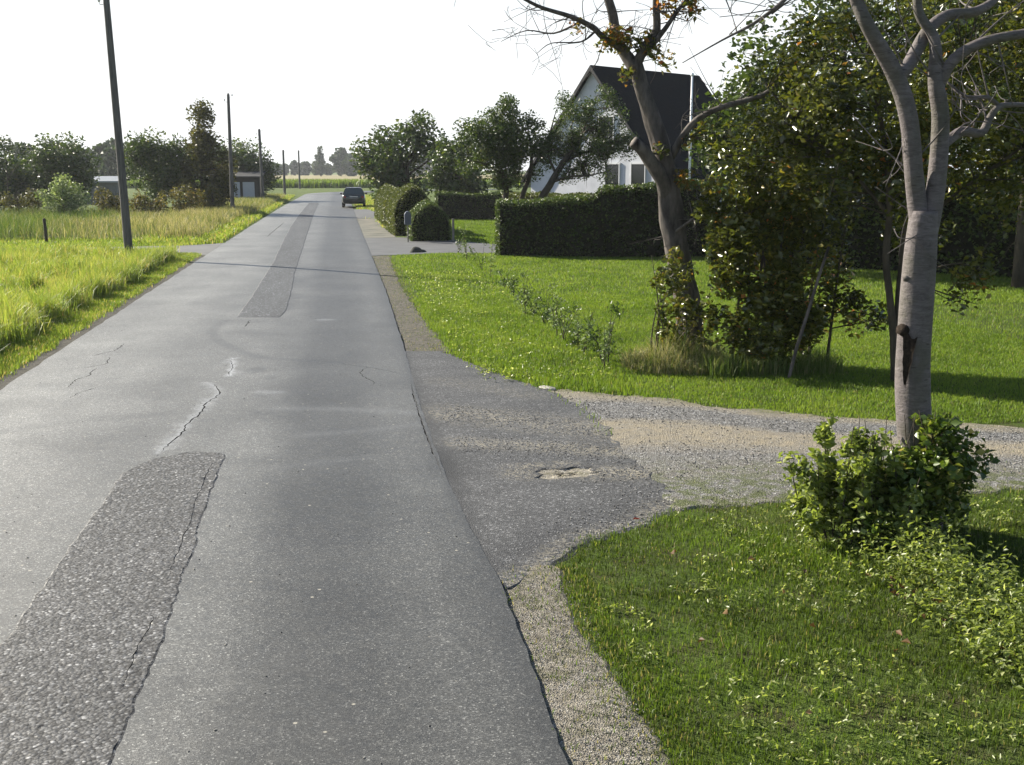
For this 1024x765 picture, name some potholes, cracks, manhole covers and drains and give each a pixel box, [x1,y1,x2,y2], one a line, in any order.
pothole [535,466,602,479]
crack [124,464,212,682]
crack [163,360,233,450]
